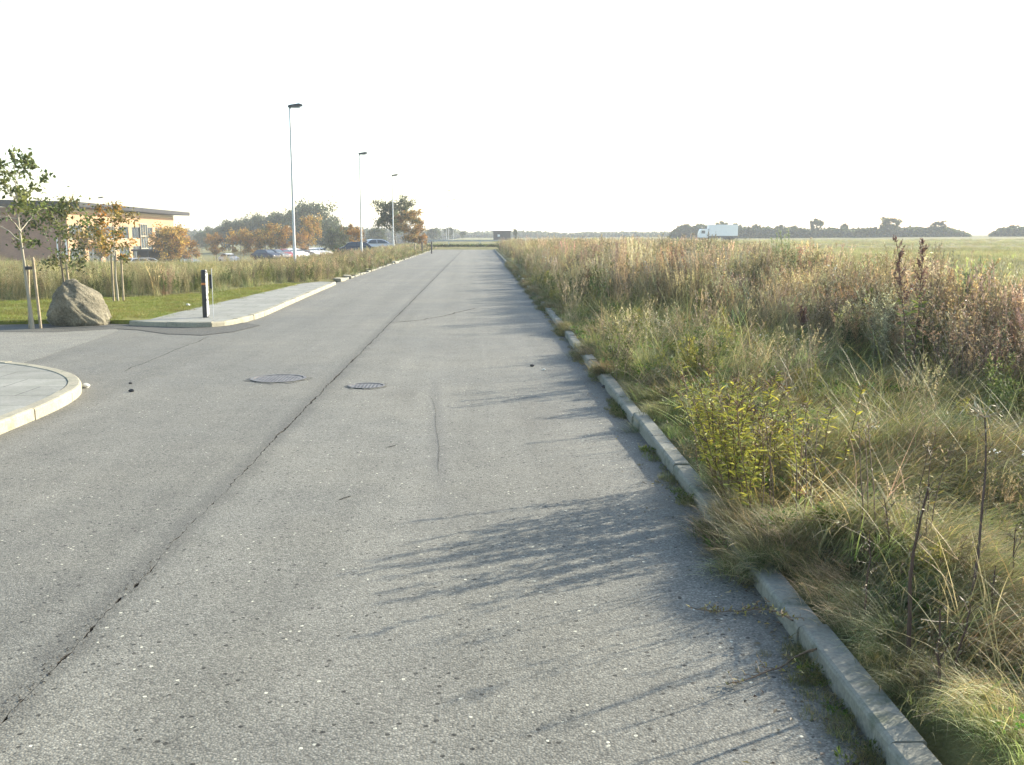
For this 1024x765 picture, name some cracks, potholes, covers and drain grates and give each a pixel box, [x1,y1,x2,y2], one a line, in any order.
manhole cover [344,382,387,390]
manhole cover [242,374,313,384]
crack [1,251,474,724]
